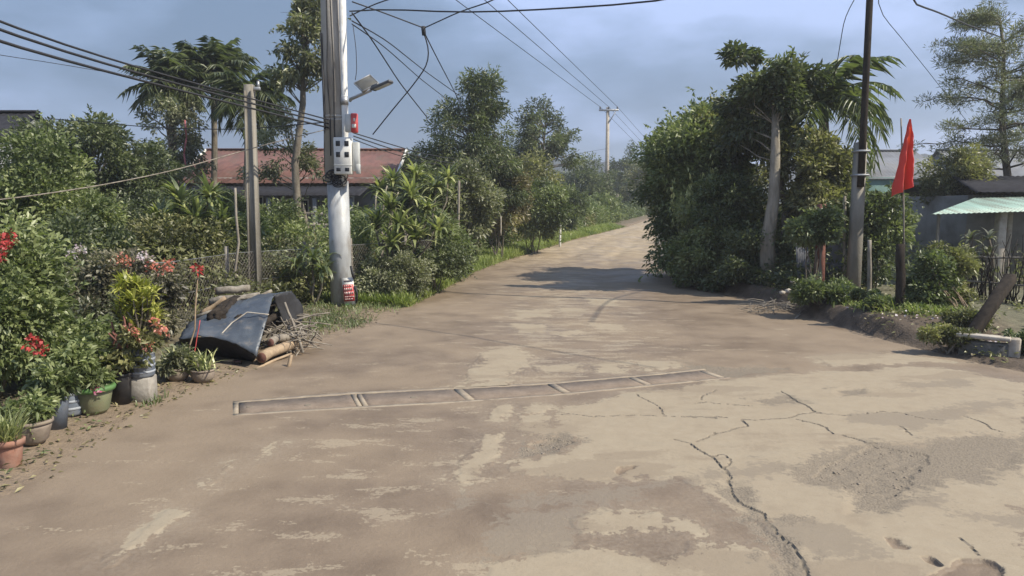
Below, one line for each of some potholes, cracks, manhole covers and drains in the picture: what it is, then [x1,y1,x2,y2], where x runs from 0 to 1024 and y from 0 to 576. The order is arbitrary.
pothole [884,536,912,550]
crack [560,390,938,576]
crack [957,537,981,556]
pothole [929,558,1006,576]
pothole [922,555,944,567]
